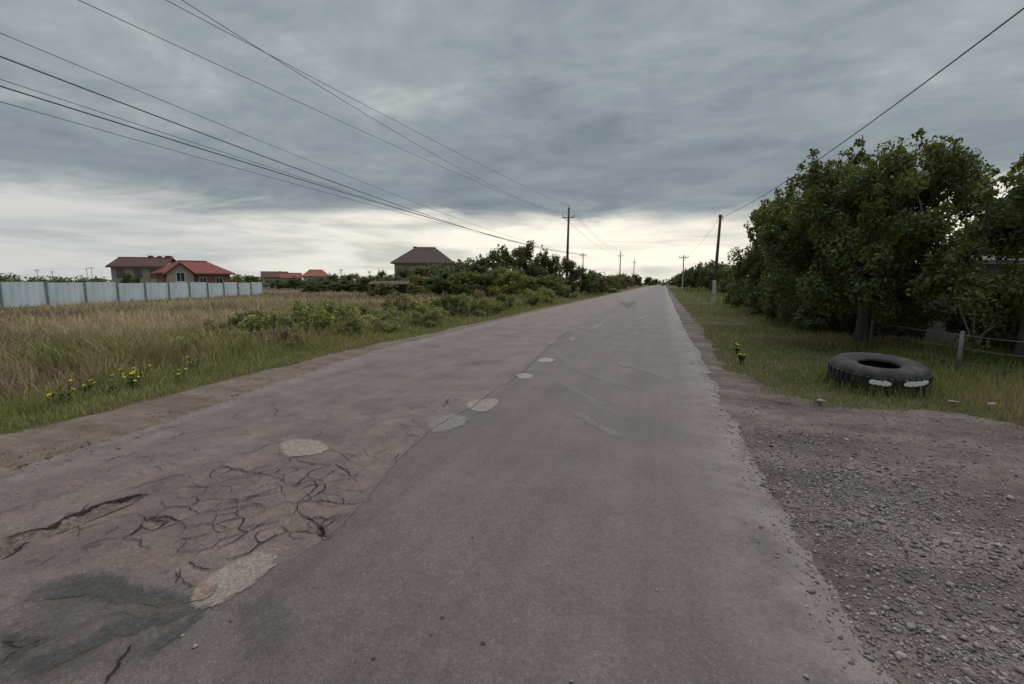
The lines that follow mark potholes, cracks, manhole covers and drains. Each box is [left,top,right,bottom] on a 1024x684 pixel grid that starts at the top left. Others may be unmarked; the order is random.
crack [0,370,513,587]
